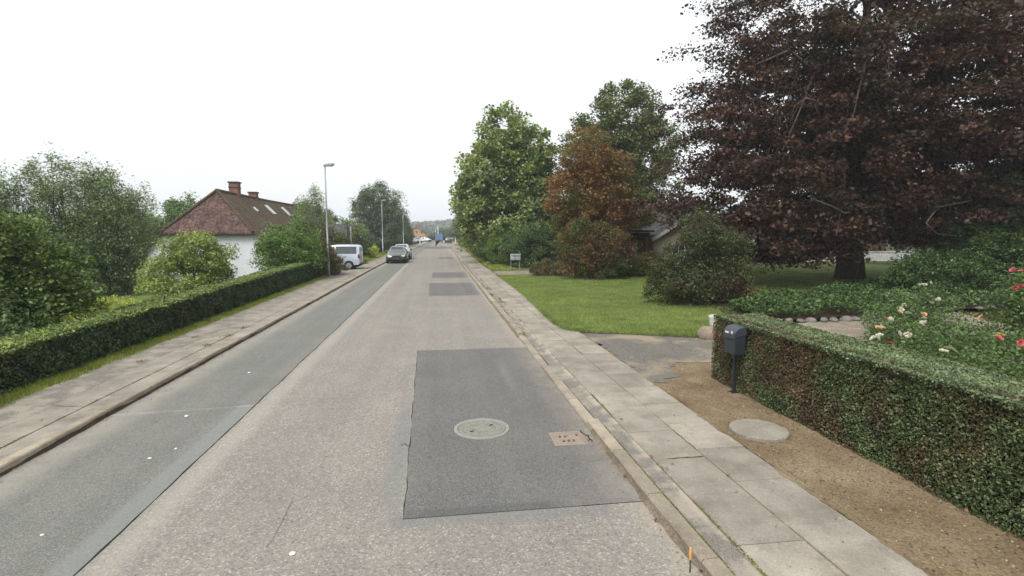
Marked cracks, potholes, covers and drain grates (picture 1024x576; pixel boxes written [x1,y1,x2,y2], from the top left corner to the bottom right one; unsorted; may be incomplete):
manhole cover [729,419,790,443]
drain grate [548,431,589,446]
manhole cover [454,418,510,439]
